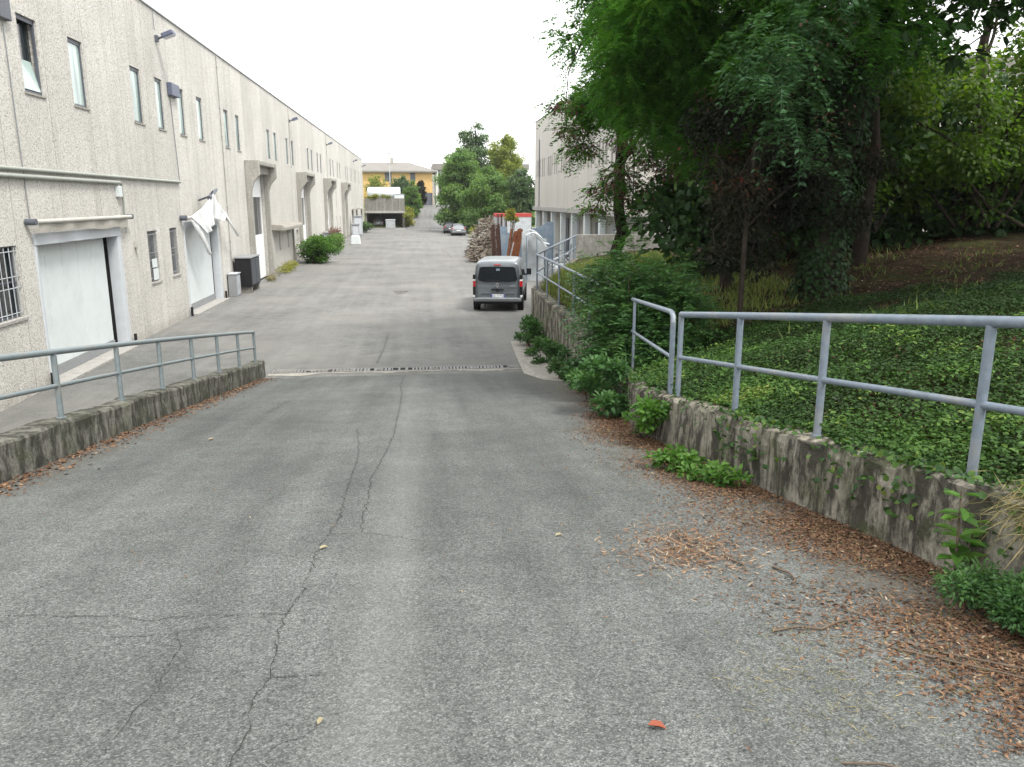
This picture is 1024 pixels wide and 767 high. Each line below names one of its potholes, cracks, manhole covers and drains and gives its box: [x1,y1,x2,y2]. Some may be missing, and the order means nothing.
crack [9,376,422,767]
